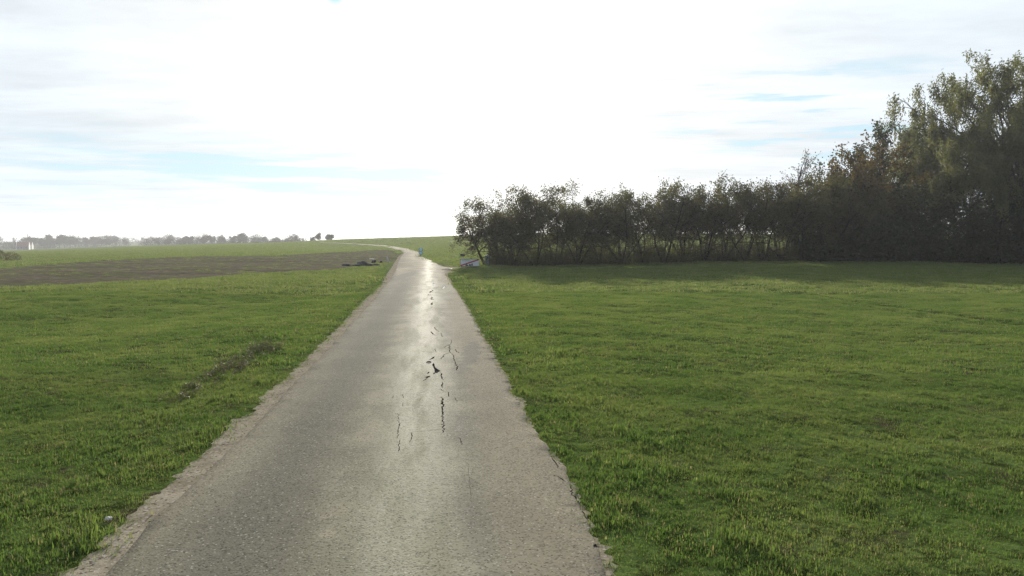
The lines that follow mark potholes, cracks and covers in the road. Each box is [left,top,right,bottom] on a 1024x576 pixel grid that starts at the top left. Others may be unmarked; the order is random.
crack [429,327,463,444]
